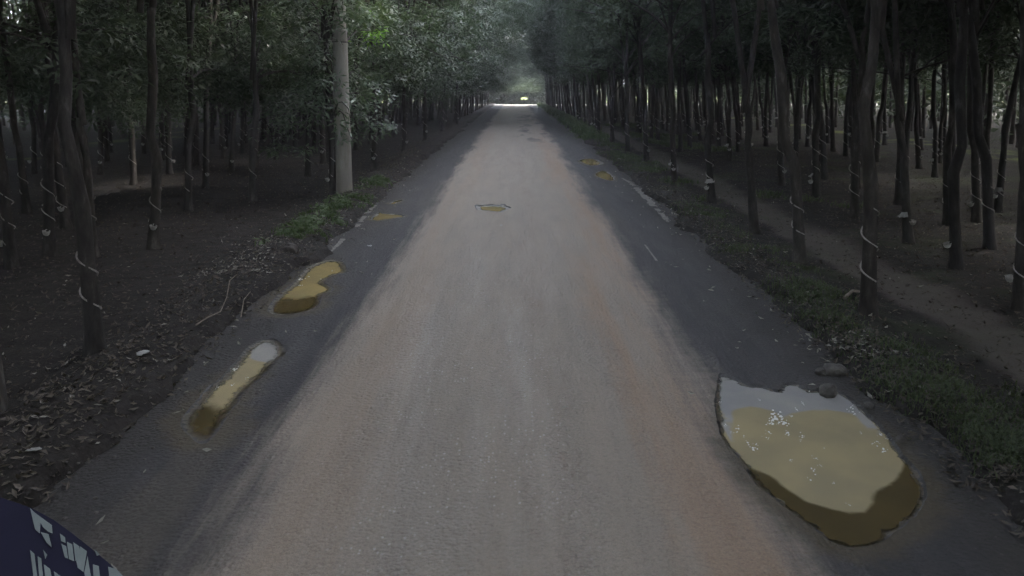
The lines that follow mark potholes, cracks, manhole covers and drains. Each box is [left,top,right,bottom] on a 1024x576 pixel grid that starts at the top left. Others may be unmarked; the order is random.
pothole [594,170,615,181]
pothole [371,211,405,220]
pothole [267,259,347,315]
pothole [475,204,511,212]
pothole [714,373,928,547]
pothole [180,338,286,444]
